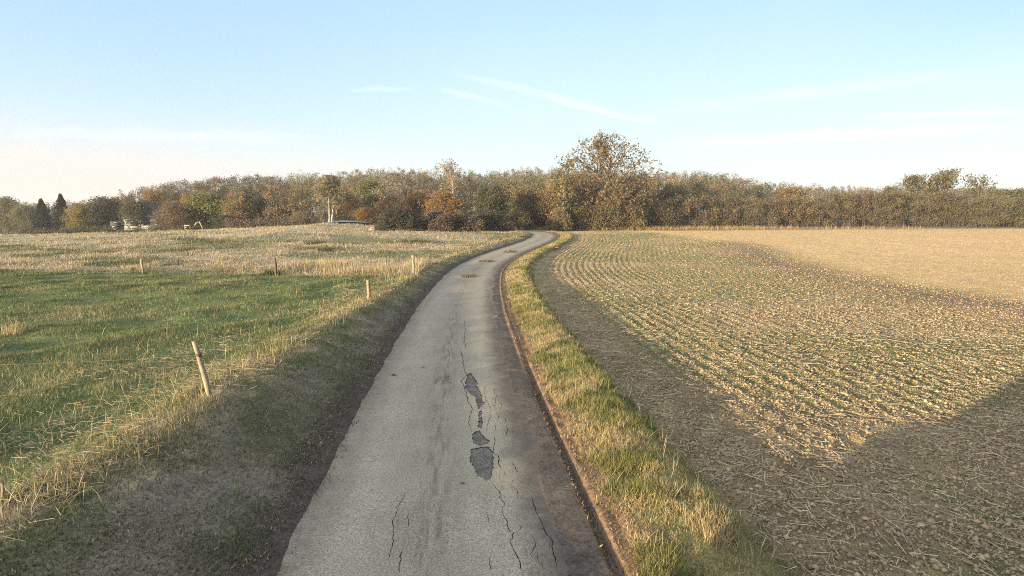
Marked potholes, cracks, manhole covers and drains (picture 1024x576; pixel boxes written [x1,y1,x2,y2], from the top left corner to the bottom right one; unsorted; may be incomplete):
crack [448,321,557,575]
pothole [465,373,484,409]
pothole [469,446,494,481]
crack [389,493,417,573]
pothole [472,430,490,446]
